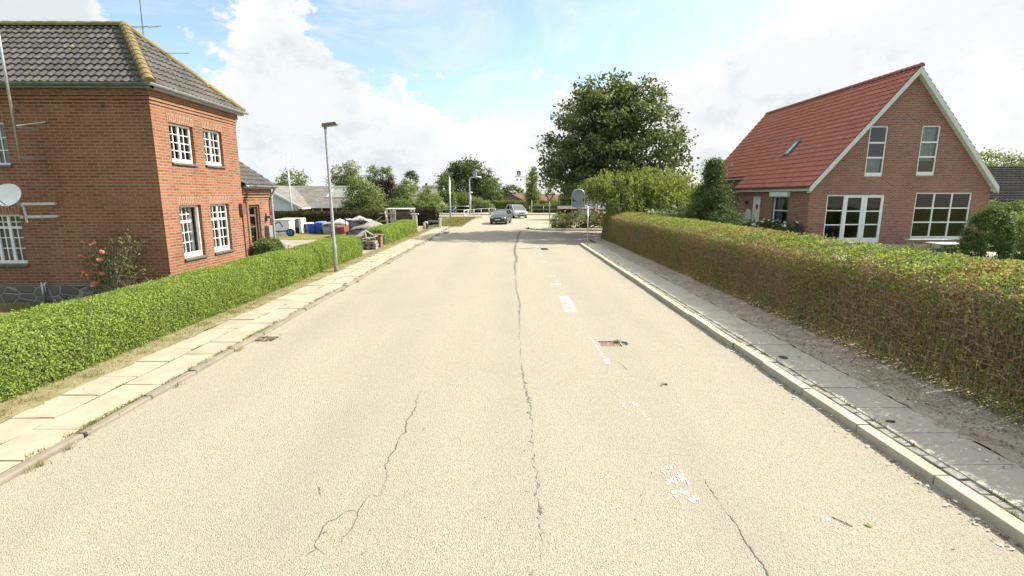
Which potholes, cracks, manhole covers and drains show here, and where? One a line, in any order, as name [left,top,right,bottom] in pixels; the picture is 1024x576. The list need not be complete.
crack [699,472,769,576]
crack [513,231,543,557]
crack [310,391,422,554]
